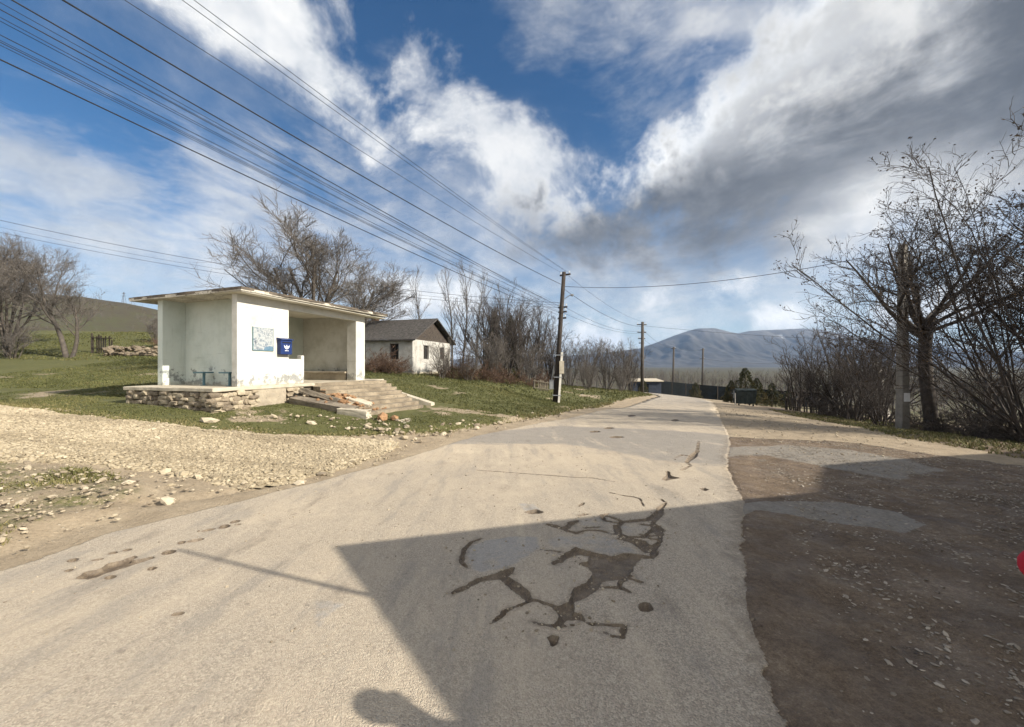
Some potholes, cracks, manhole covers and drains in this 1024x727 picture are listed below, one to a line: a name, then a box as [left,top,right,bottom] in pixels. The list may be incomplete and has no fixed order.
crack [675,441,700,470]
crack [451,470,667,639]
pothole [76,556,155,580]
pothole [638,602,654,612]
